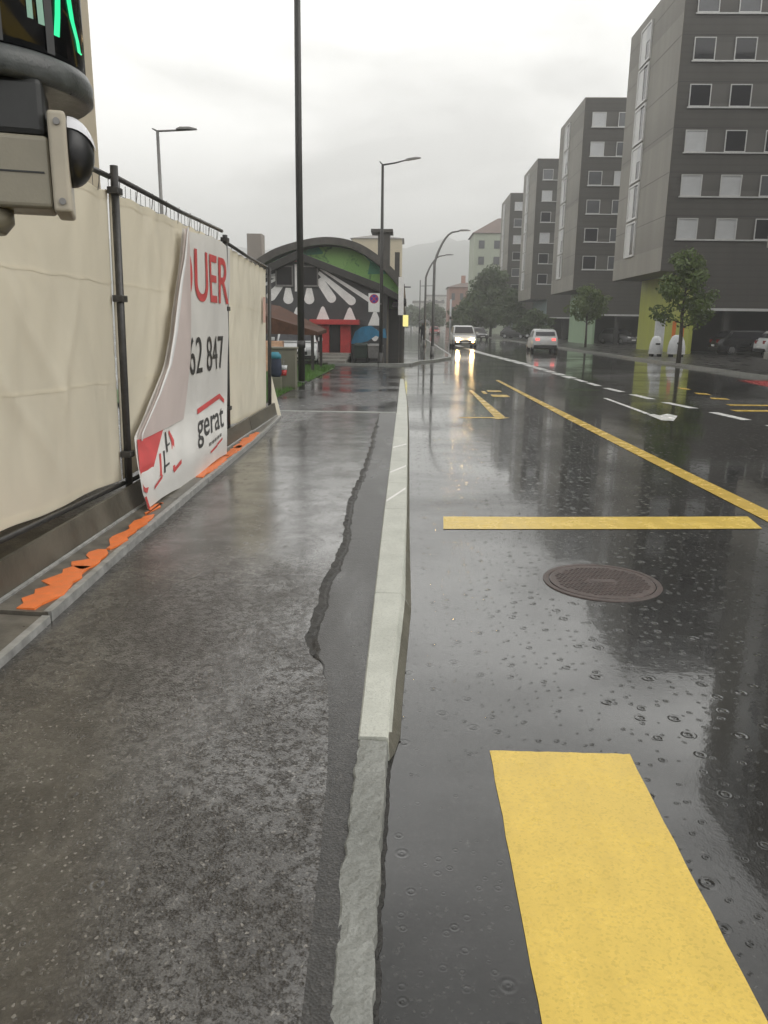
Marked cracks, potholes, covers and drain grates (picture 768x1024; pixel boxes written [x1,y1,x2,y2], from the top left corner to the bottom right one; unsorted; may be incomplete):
manhole cover [543,564,663,602]
crack [305,421,379,678]
